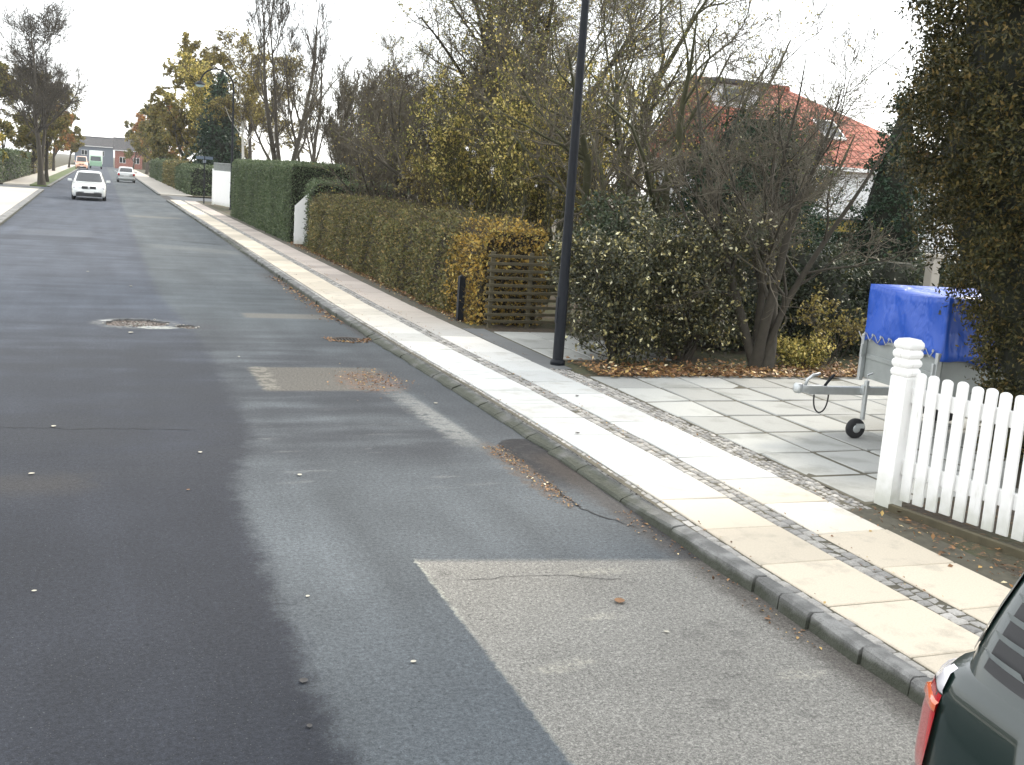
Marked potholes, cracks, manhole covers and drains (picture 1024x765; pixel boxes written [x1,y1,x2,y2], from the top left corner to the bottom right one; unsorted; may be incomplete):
crack [548,482,632,526]
pothole [102,319,169,327]
